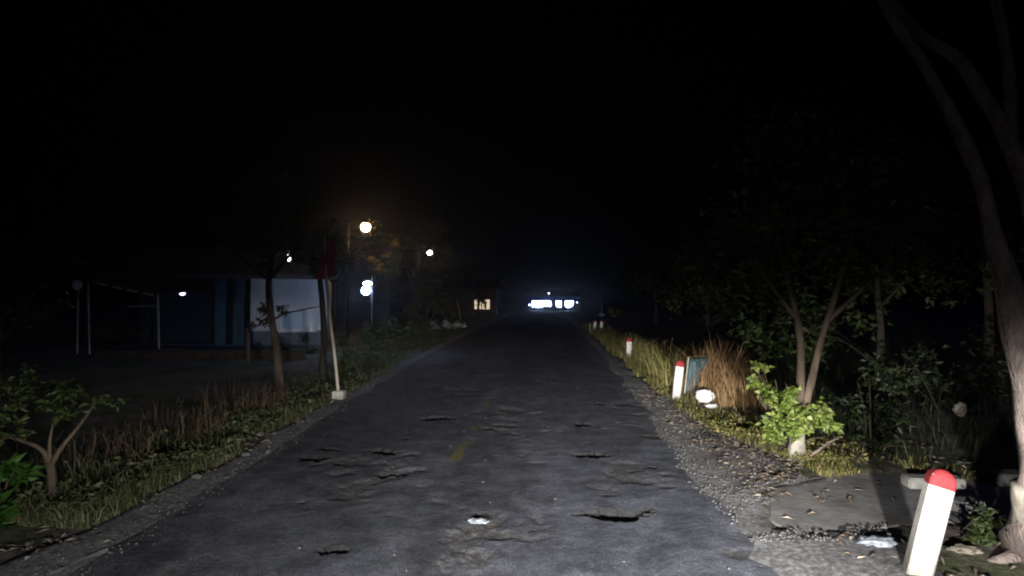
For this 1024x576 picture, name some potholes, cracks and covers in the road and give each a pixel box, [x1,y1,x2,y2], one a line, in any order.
pothole [372,471,411,479]
pothole [295,454,335,463]
pothole [360,448,406,456]
pothole [571,507,660,523]
pothole [570,451,612,459]
pothole [309,545,351,556]
